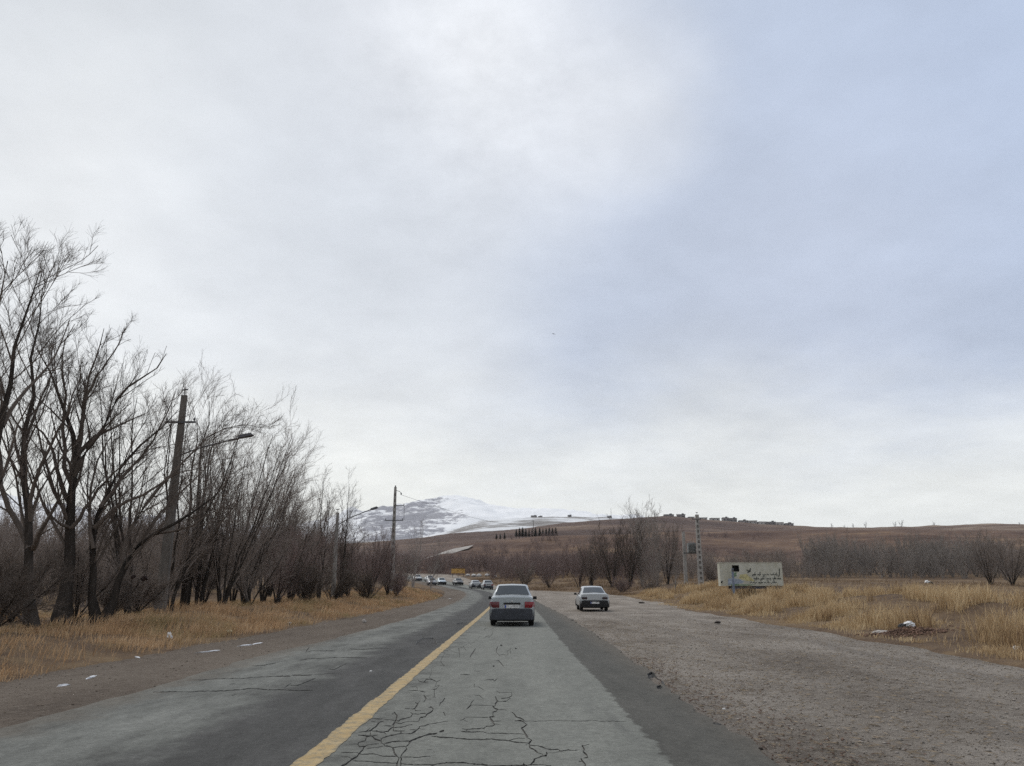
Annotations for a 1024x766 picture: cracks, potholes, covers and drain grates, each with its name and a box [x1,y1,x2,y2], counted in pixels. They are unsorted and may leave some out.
crack [341,628,626,766]
crack [161,648,390,696]
